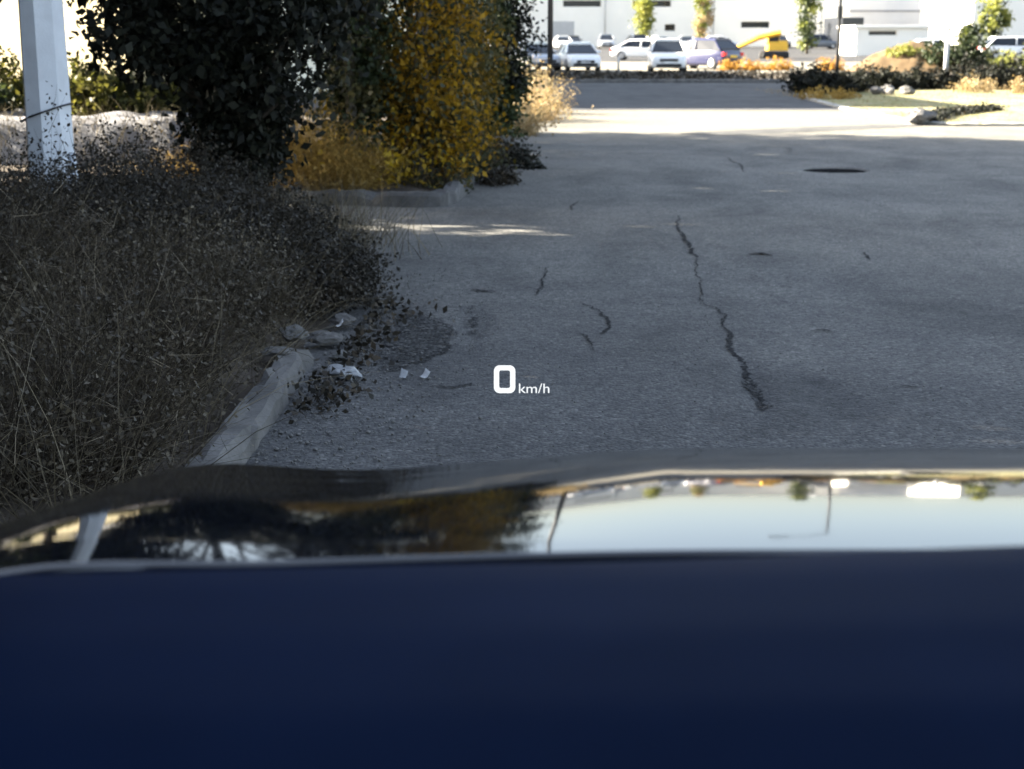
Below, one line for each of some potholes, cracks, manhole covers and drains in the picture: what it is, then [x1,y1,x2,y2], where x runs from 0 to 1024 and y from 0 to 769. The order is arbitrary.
crack [657,215,774,408]
crack [535,266,612,350]
